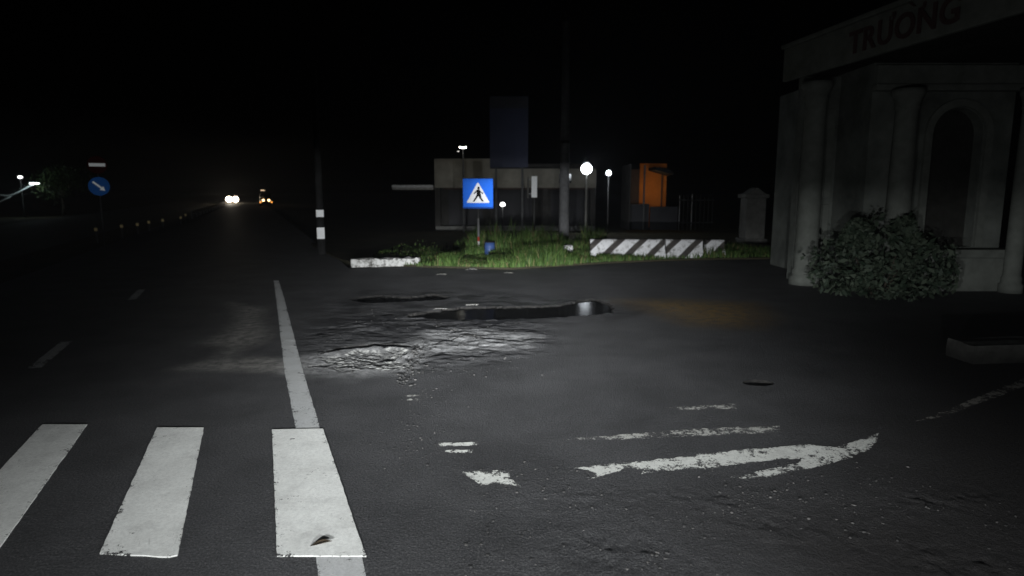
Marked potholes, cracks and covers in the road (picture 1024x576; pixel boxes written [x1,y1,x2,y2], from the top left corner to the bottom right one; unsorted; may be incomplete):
pothole [406,299,615,320]
pothole [349,294,449,303]
pothole [306,347,413,373]
